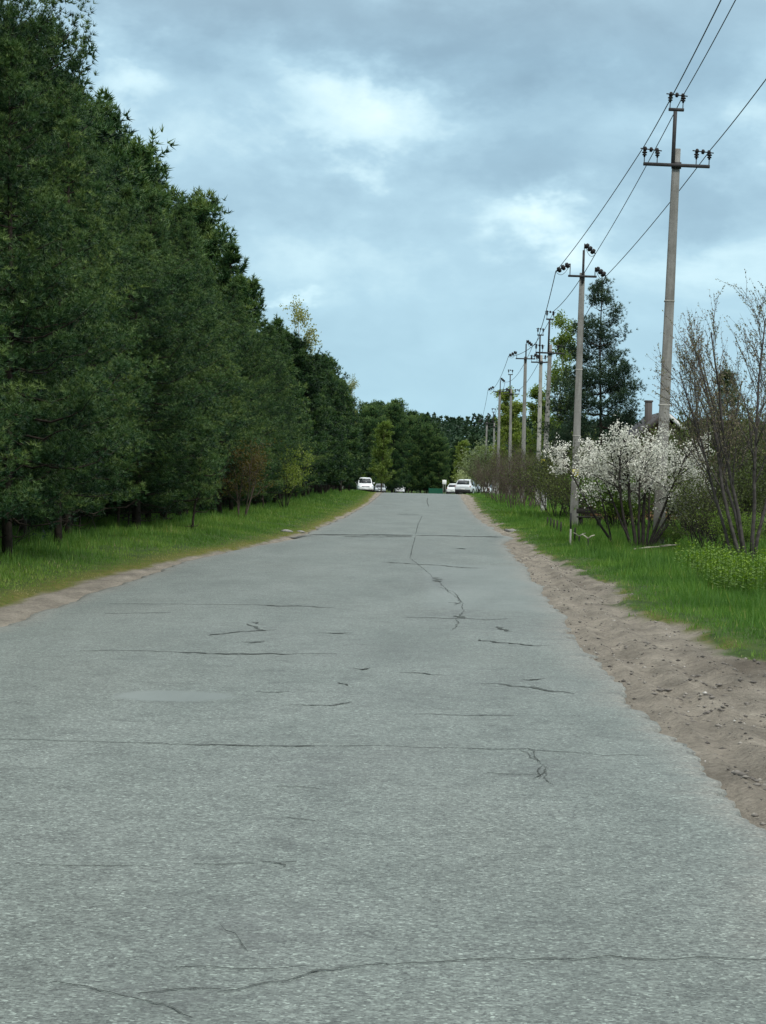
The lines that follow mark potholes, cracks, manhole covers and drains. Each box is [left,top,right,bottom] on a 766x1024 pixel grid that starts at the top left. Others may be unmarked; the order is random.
crack [389,498,547,646]
crack [39,739,632,784]
crack [80,603,337,654]
crack [53,925,766,1017]
crack [485,678,574,694]
